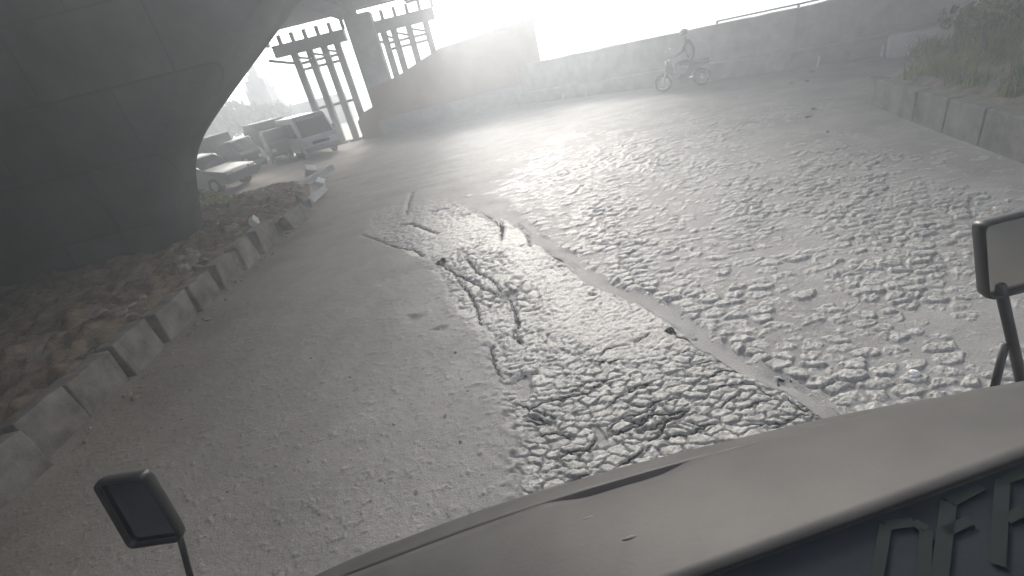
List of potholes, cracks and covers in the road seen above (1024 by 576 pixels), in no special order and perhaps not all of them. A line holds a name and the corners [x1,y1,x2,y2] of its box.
crack [364,195,848,482]
